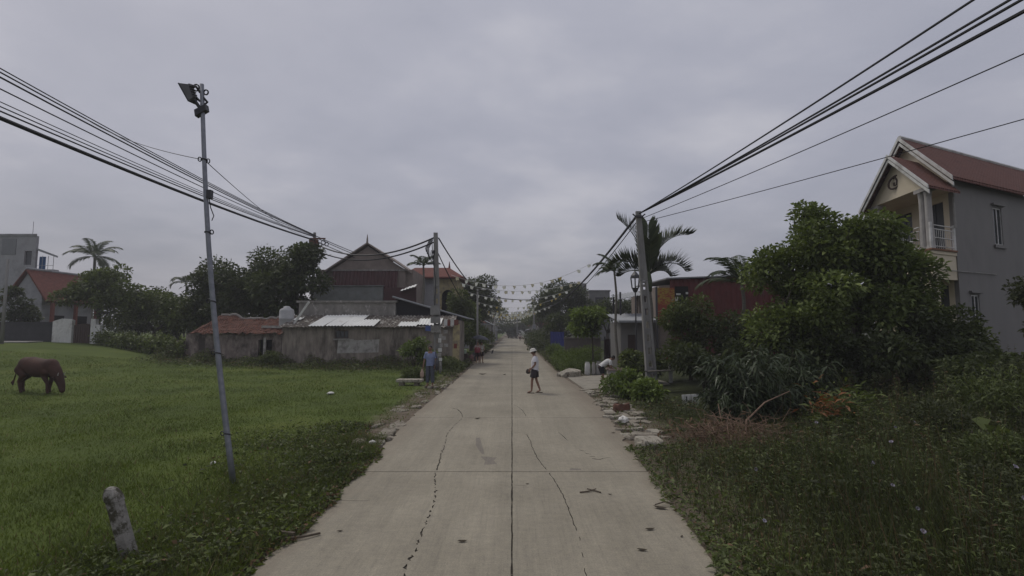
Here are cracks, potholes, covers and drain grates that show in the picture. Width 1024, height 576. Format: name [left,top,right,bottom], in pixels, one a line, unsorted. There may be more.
crack [526,434,587,576]
crack [403,409,463,576]
